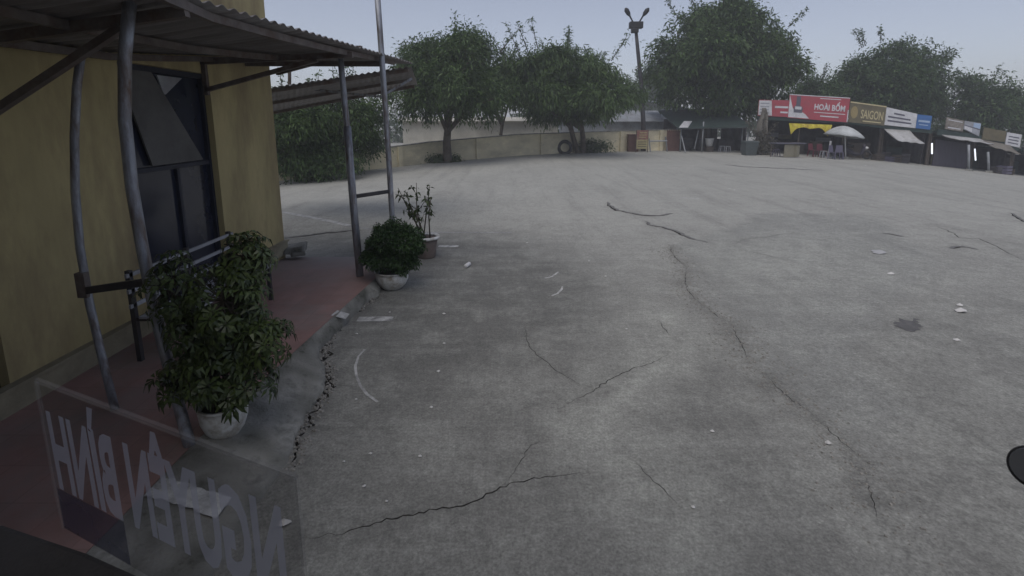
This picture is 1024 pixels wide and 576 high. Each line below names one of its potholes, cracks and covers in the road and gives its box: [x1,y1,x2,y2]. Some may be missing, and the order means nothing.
crack [313,441,575,539]
crack [883,226,1017,257]
crack [291,298,378,467]
crack [526,333,667,409]
crack [607,202,707,242]
